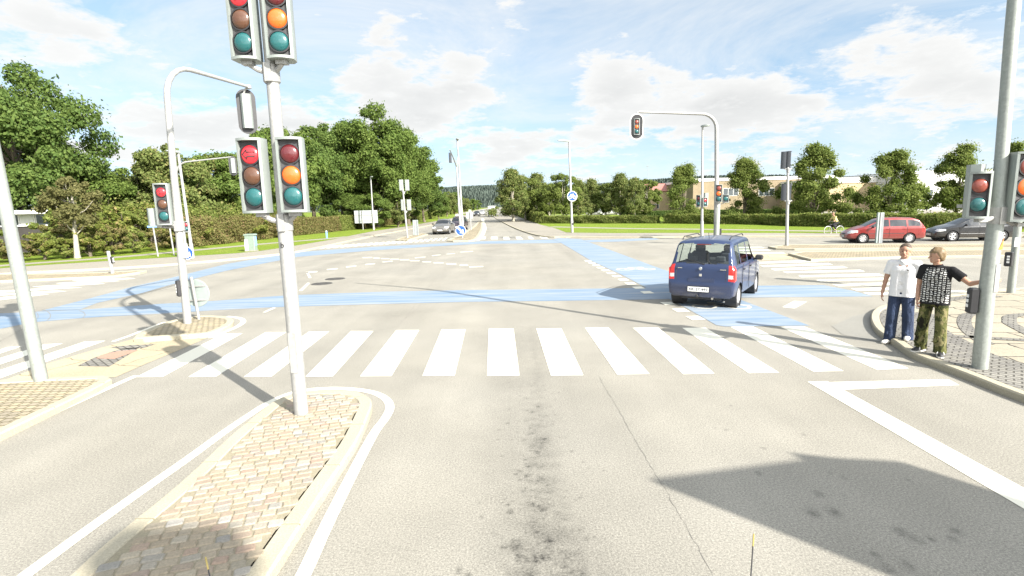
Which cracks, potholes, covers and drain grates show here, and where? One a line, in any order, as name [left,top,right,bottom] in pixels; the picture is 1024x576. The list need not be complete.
crack [599,376,714,576]
